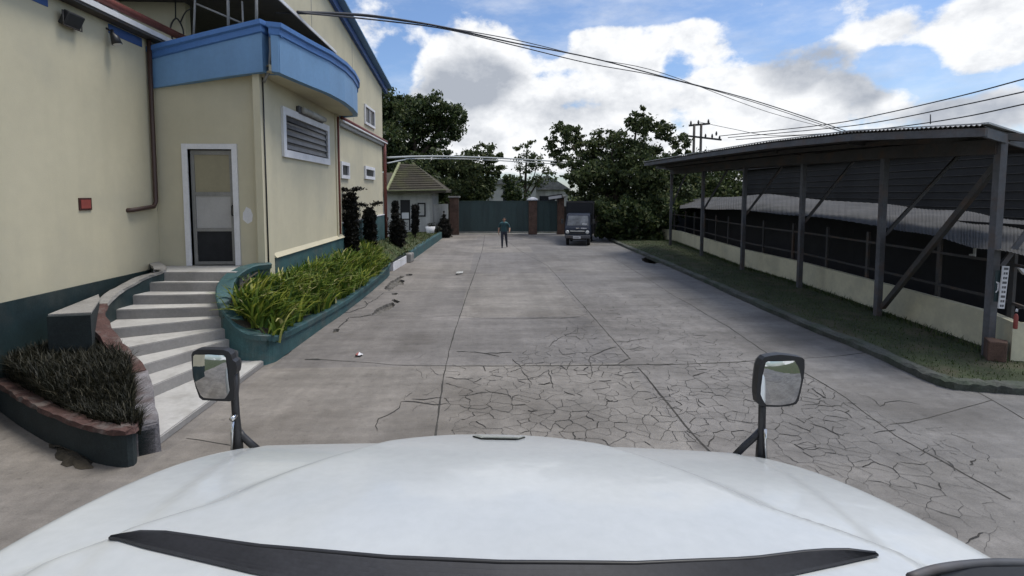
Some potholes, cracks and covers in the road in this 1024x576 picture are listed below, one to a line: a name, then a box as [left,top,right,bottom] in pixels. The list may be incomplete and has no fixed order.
pothole [384,276,405,291]
pothole [372,302,395,315]
crack [375,280,1022,549]
